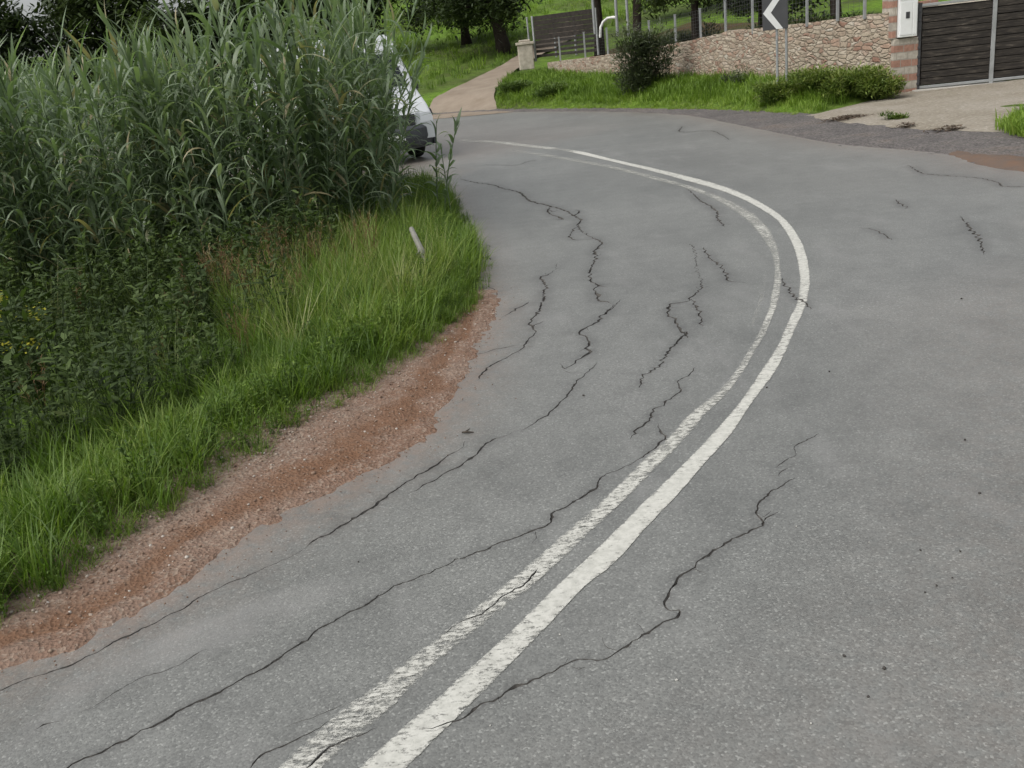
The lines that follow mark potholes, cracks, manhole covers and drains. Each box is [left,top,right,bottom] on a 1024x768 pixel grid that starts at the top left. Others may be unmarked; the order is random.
crack [686,188,724,226]
crack [961,217,985,255]
crack [1,244,817,768]
crack [309,181,620,544]
